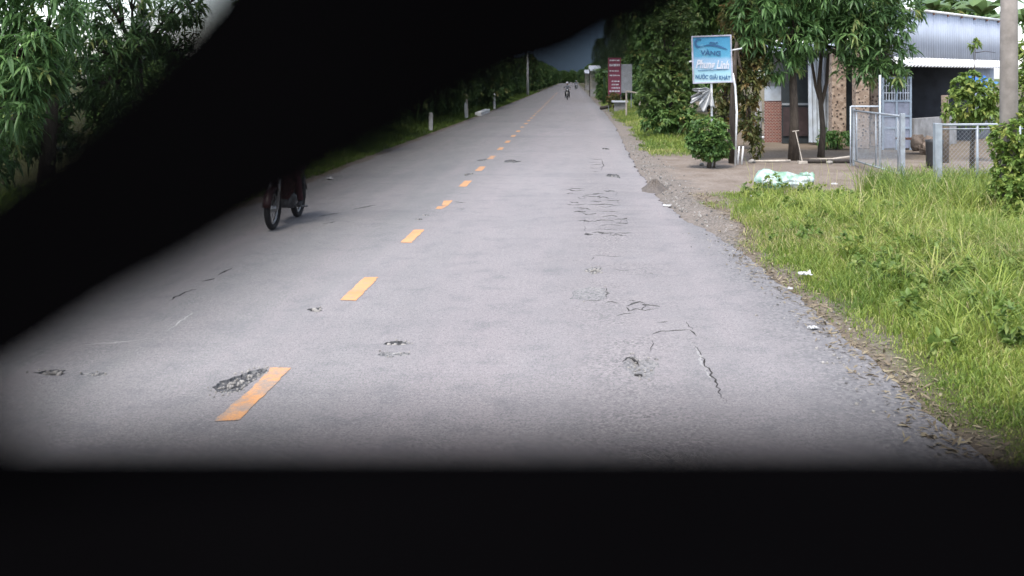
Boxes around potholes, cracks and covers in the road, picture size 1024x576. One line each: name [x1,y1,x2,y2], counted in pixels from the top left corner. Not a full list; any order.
crack [623,322,727,402]
pothole [207,365,280,398]
pothole [377,350,410,358]
crack [567,159,628,236]
